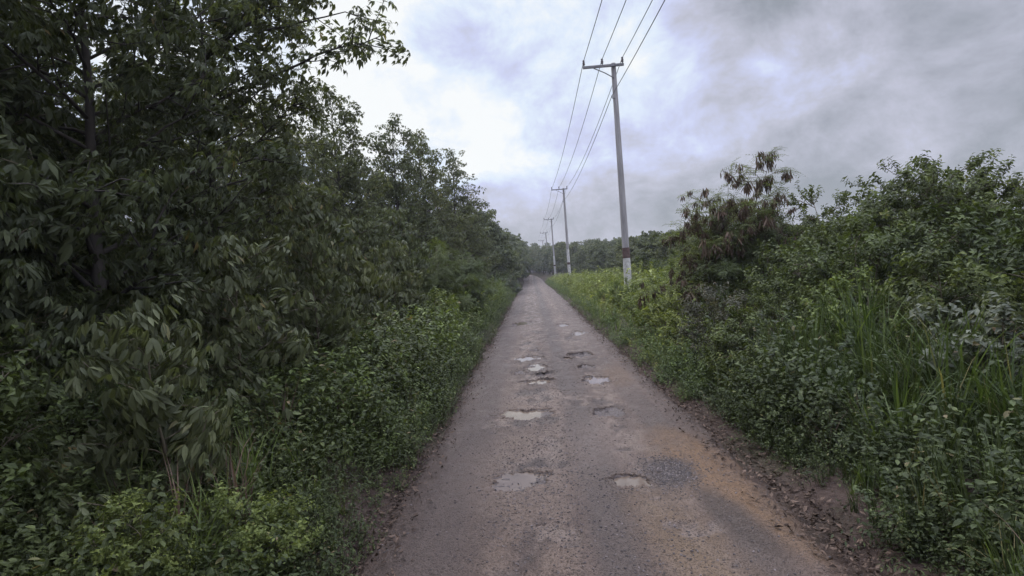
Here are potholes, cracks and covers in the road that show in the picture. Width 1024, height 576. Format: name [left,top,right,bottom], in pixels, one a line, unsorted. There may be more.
pothole [577,375,616,387]
pothole [509,355,550,363]
pothole [512,376,563,387]
pothole [587,405,632,419]
pothole [561,350,598,358]
pothole [599,471,659,490]
pothole [481,468,563,497]
pothole [489,406,564,423]
pothole [519,362,551,373]
